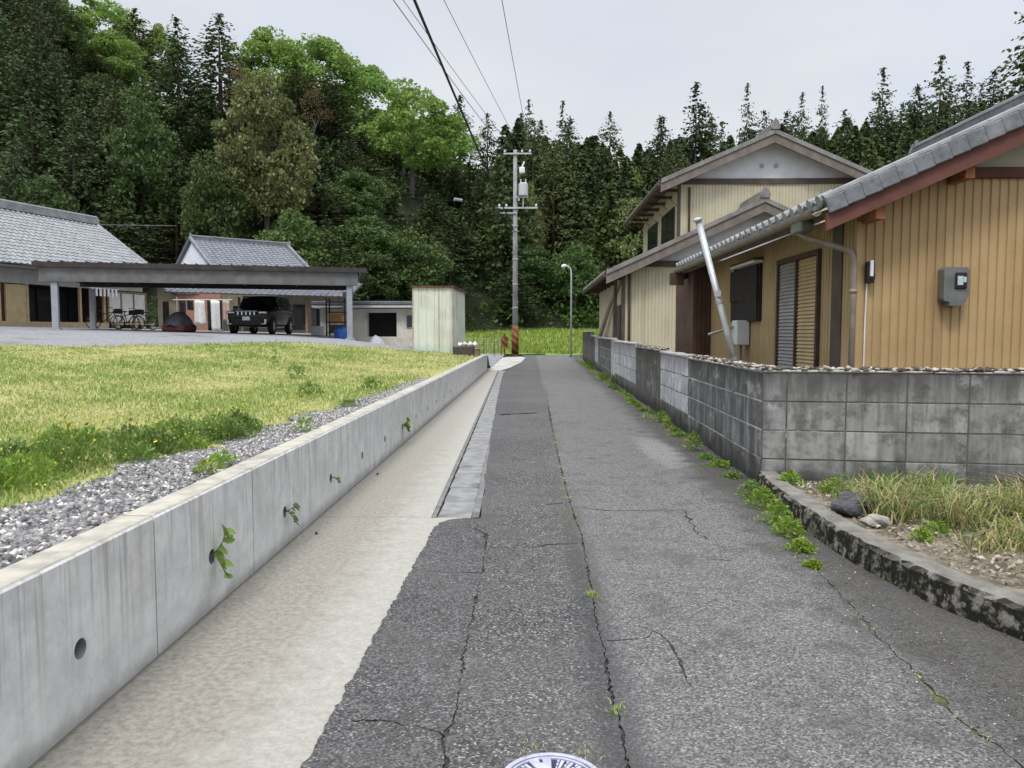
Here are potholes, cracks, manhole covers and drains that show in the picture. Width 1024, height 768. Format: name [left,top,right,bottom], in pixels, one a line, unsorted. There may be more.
crack [346,389,709,768]
manhole cover [505,752,597,768]
